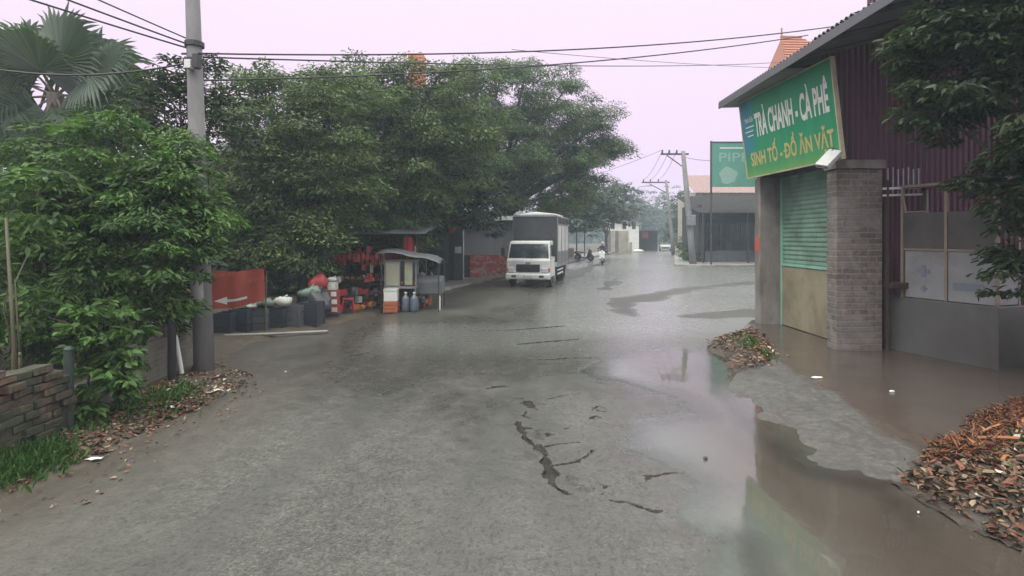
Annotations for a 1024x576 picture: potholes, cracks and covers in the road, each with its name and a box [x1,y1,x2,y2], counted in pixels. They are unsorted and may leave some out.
crack [476,382,710,522]
crack [465,324,600,362]
